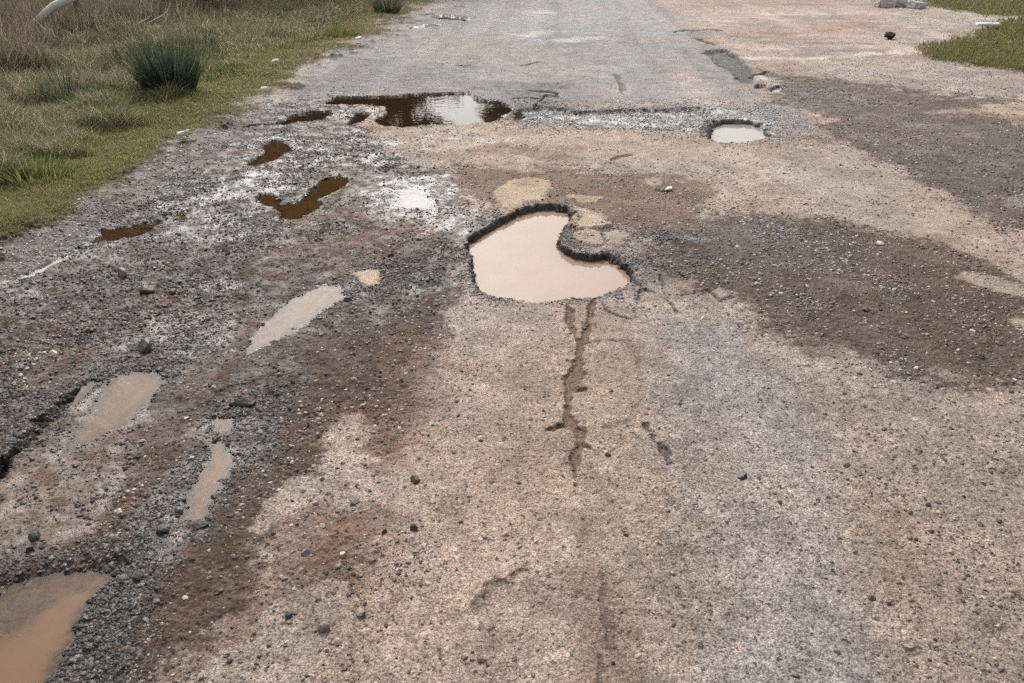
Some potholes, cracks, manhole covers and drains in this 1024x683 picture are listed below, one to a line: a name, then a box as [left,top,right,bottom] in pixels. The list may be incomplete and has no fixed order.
pothole [242,139,296,167]
pothole [238,281,351,358]
crack [544,273,734,493]
pothole [465,203,637,304]
